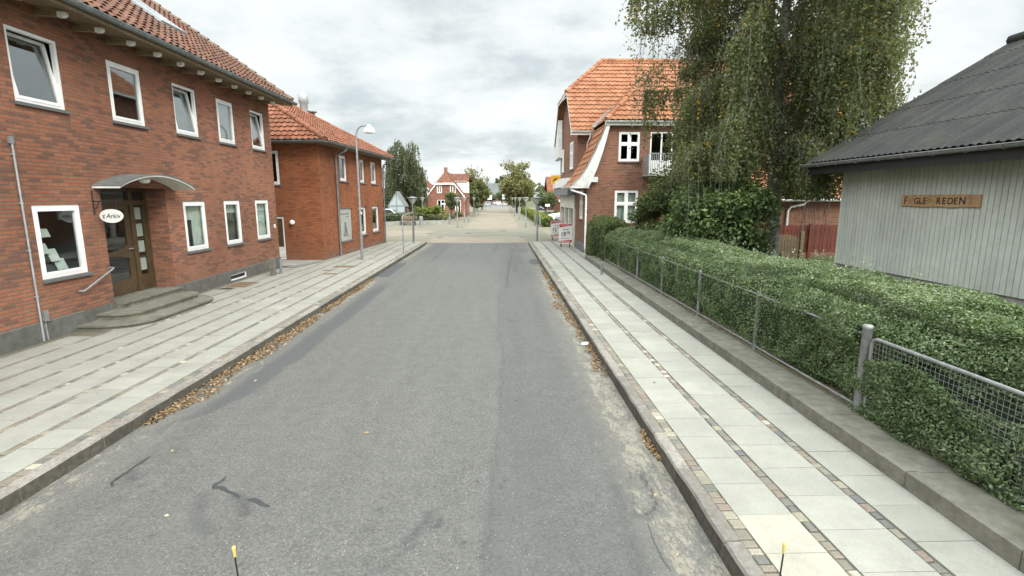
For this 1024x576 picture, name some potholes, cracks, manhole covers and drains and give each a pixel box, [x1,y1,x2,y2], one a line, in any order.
crack [648,524,671,571]
